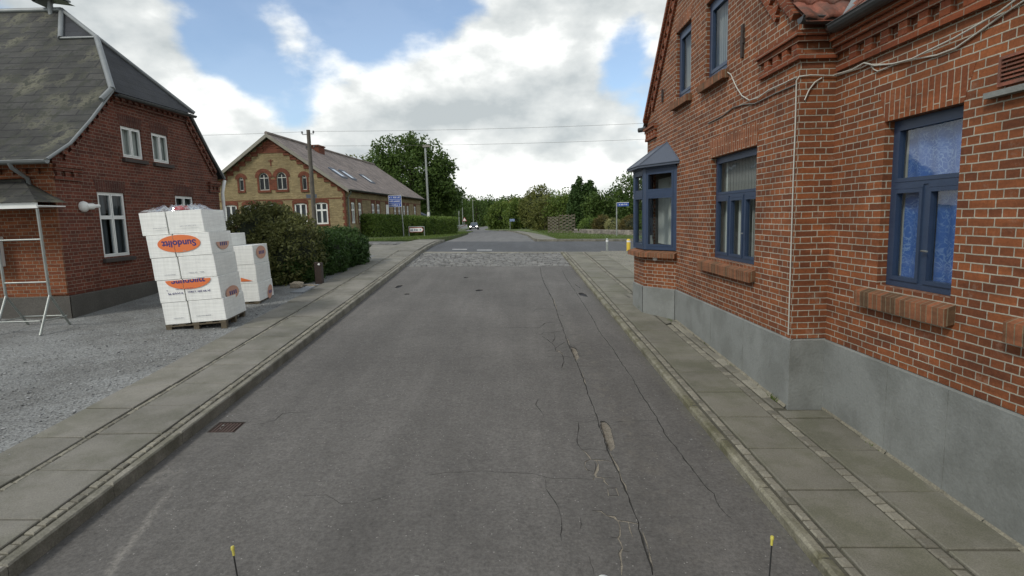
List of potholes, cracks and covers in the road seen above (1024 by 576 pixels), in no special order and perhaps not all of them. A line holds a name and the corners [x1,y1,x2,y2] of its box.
pothole [600,421,615,451]
crack [425,269,732,575]
drain grate [207,422,246,433]
